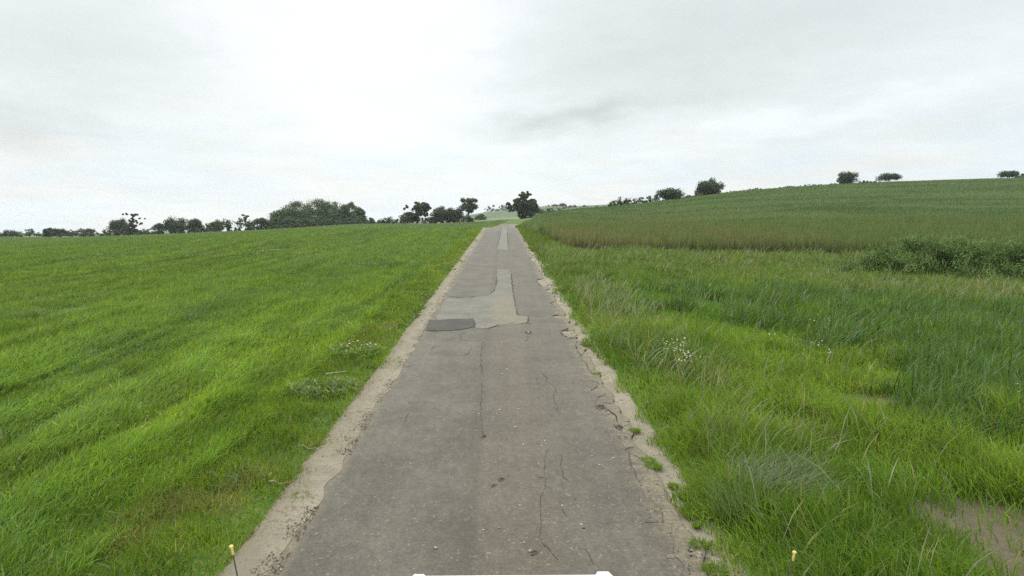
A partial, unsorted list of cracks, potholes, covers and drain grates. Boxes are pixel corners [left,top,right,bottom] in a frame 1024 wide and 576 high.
crack [539,455,575,560]
crack [567,328,690,575]
